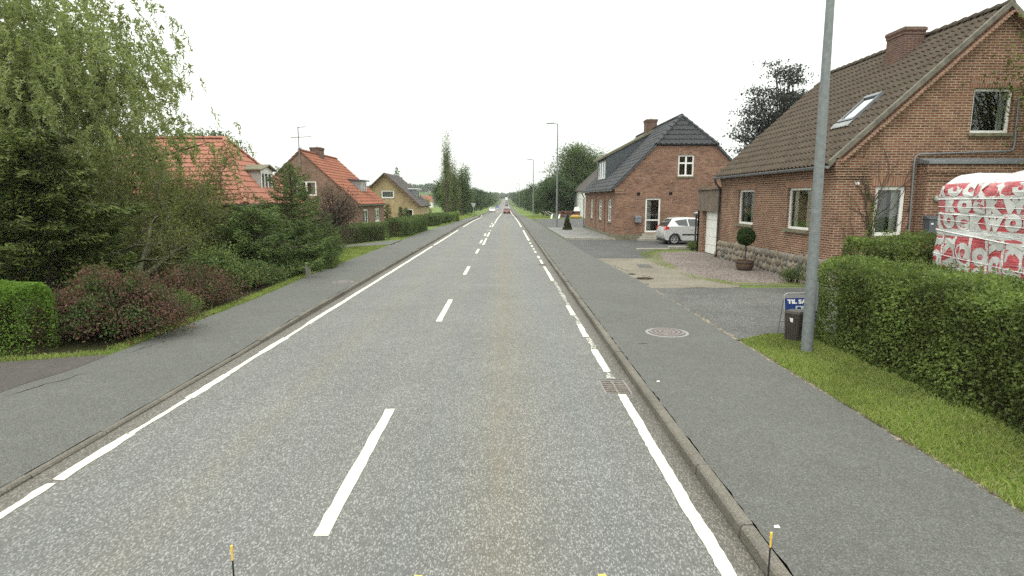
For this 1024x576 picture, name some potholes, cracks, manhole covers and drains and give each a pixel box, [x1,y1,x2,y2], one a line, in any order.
drain grate [598,380,633,394]
manhole cover [645,328,689,338]
